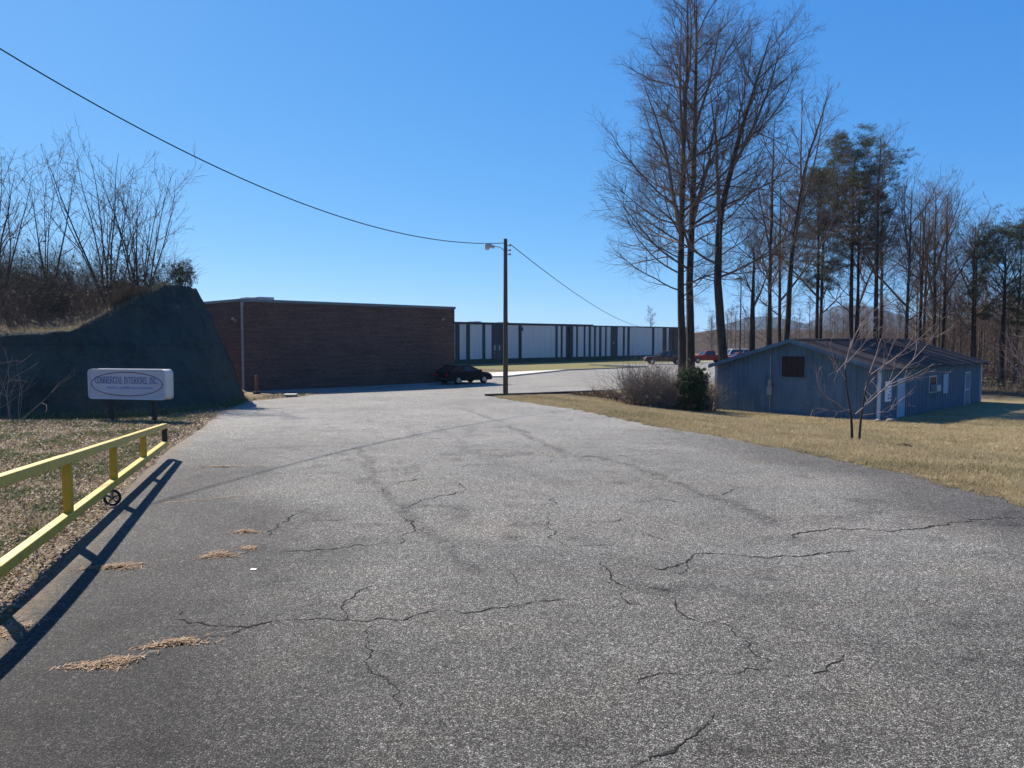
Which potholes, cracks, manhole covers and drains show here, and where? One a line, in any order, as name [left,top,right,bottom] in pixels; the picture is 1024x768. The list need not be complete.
crack [647,517,1024,575]
crack [532,495,772,683]
crack [631,710,714,768]
crack [802,653,856,675]
crack [177,586,570,709]
crack [293,468,464,551]
